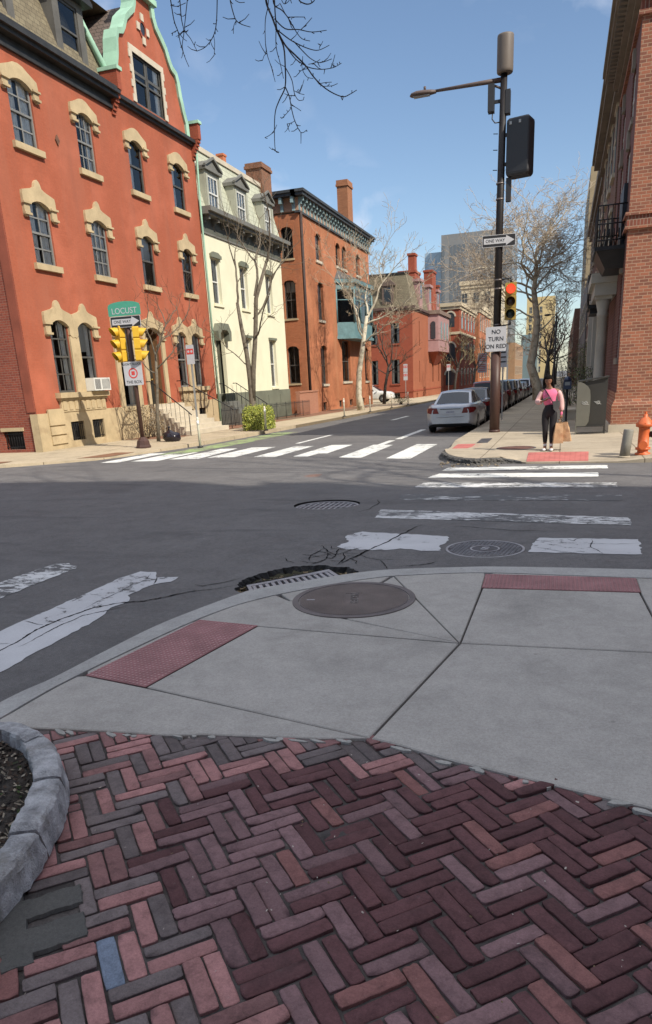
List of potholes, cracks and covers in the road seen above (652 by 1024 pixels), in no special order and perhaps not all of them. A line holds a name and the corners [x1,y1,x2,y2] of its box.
manhole cover [446,540,525,557]
manhole cover [292,582,416,619]
crack [286,526,417,568]
